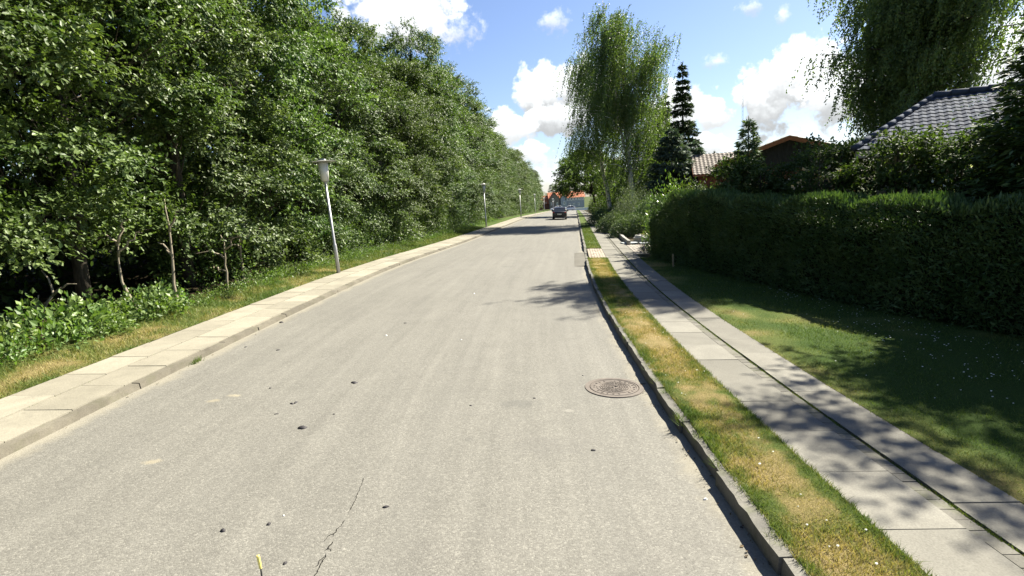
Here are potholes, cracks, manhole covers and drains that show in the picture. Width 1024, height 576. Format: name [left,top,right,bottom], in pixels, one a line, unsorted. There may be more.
crack [314,478,364,576]
manhole cover [585,378,644,398]
